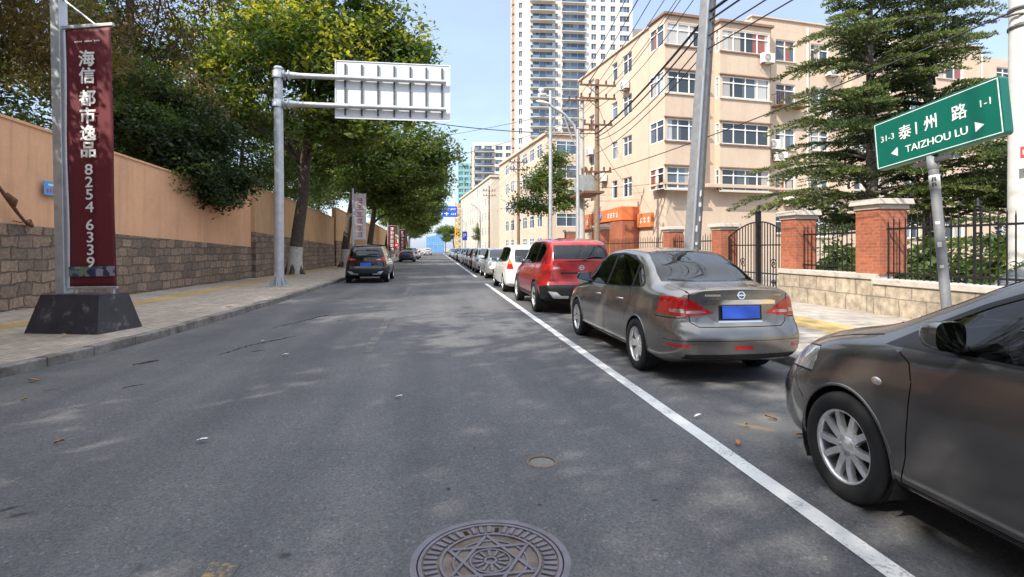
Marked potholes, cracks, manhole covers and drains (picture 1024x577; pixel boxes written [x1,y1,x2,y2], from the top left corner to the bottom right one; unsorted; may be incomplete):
crack [217,314,330,356]
manhole cover [409,519,571,577]
utility cover [526,456,557,468]
